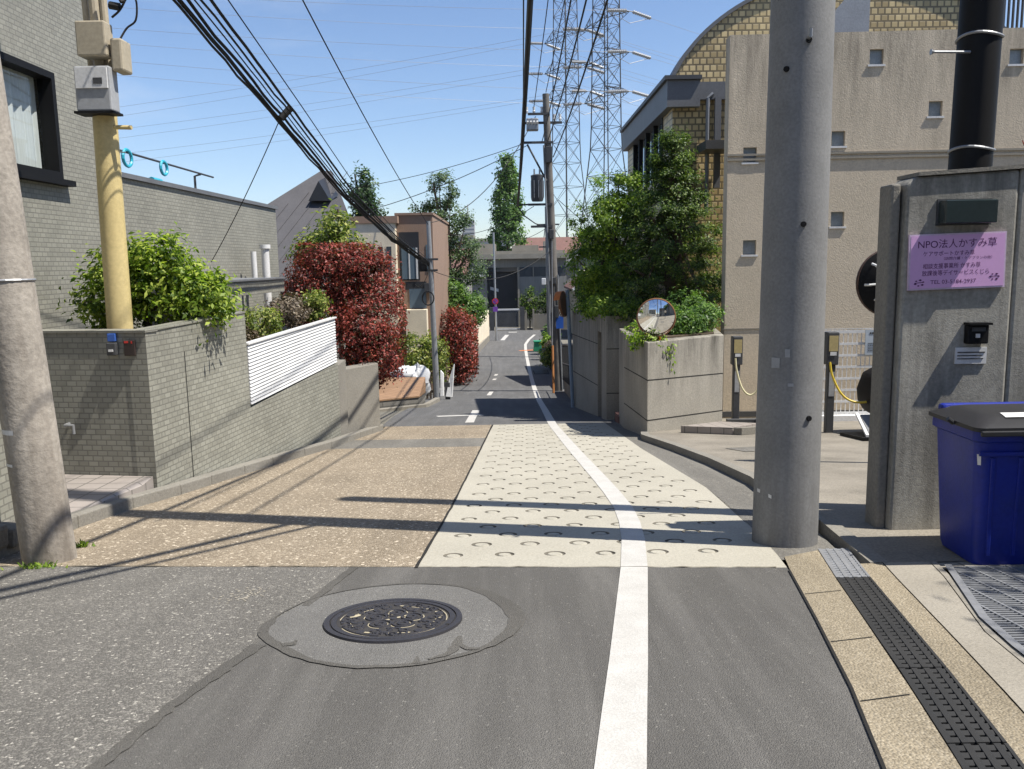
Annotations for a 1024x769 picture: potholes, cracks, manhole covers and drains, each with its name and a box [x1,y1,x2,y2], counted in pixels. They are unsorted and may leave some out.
manhole cover [323,598,462,644]
drain grate [944,564,1024,654]
